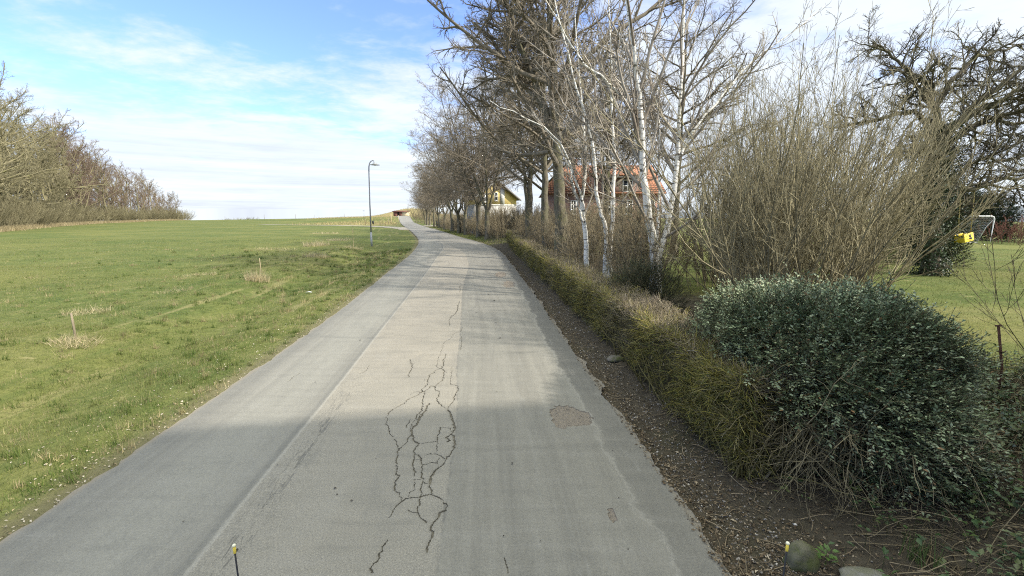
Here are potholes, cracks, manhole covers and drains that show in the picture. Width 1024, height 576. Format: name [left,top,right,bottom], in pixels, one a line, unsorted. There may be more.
crack [369,540,388,573]
crack [386,338,459,553]
